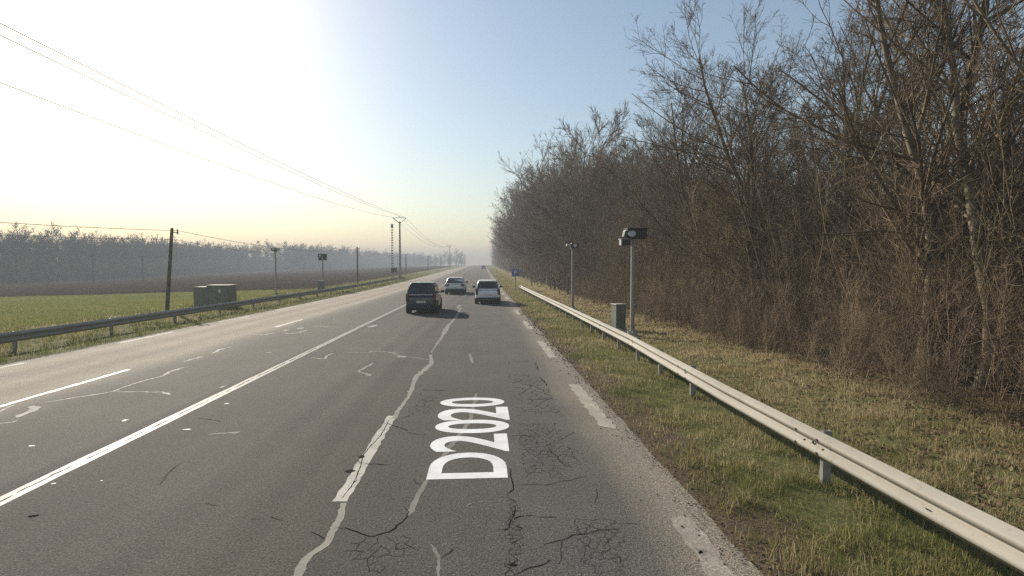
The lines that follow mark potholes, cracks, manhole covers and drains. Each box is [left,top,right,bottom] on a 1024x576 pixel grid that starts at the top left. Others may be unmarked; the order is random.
crack [344,509,418,573]
crack [501,362,637,576]
crack [344,390,443,495]
